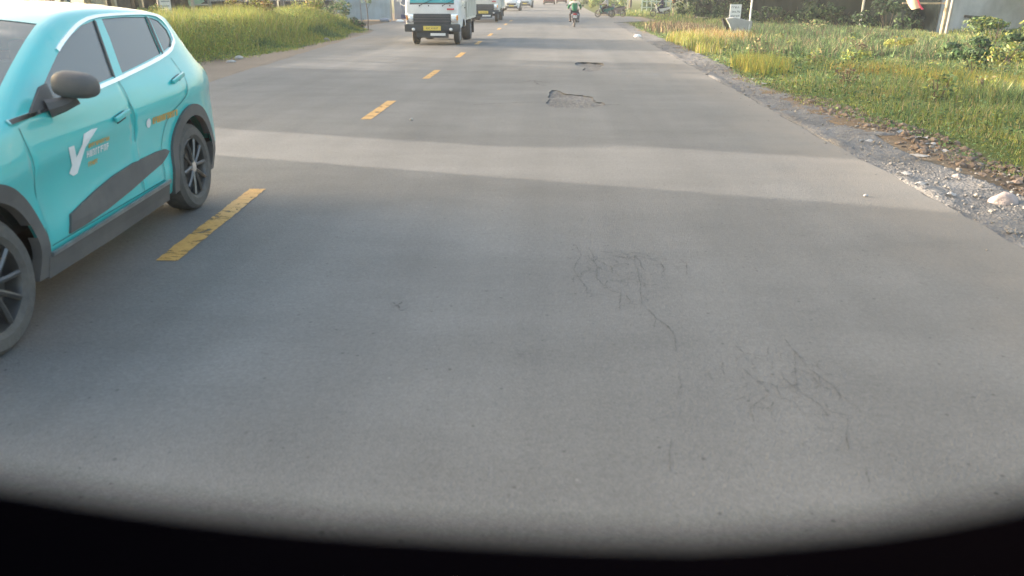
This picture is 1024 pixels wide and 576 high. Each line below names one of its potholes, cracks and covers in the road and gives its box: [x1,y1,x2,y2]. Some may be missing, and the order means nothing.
pothole [546,90,605,109]
pothole [575,62,604,72]
crack [569,245,688,309]
crack [708,338,860,445]
